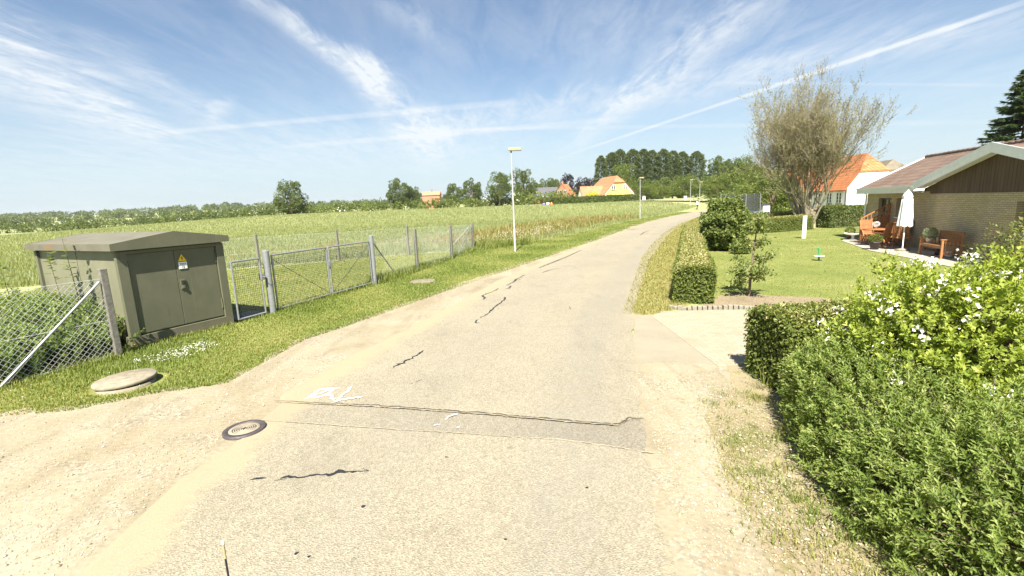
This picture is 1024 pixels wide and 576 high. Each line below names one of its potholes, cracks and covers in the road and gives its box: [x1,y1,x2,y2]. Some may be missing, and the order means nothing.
manhole cover [222,420,266,441]
crack [250,468,366,481]
crack [475,250,581,323]
